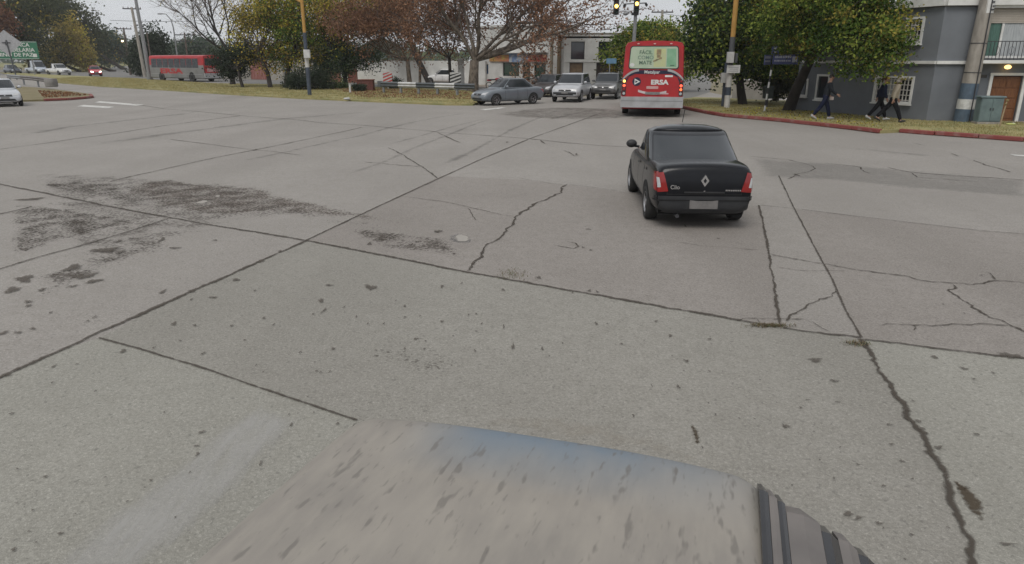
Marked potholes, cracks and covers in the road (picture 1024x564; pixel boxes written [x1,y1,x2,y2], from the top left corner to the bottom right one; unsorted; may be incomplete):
crack [737,290,837,332]
crack [413,180,617,270]
crack [773,254,1024,331]
